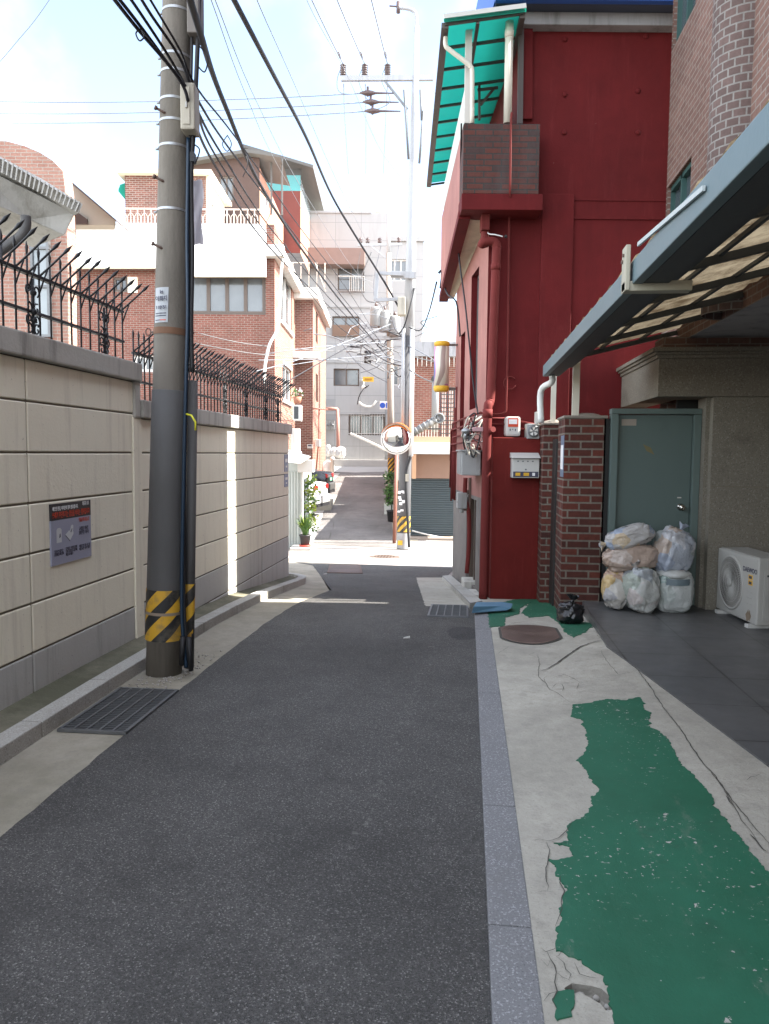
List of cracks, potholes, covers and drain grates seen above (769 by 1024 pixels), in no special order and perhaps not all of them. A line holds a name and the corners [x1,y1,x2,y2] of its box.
drain grate [57,687,179,735]
pothole [564,983,611,1011]
drain grate [427,604,468,618]
crack [535,824,571,926]
crack [537,640,637,701]
manhole cover [498,625,563,644]
crack [544,948,595,1009]
